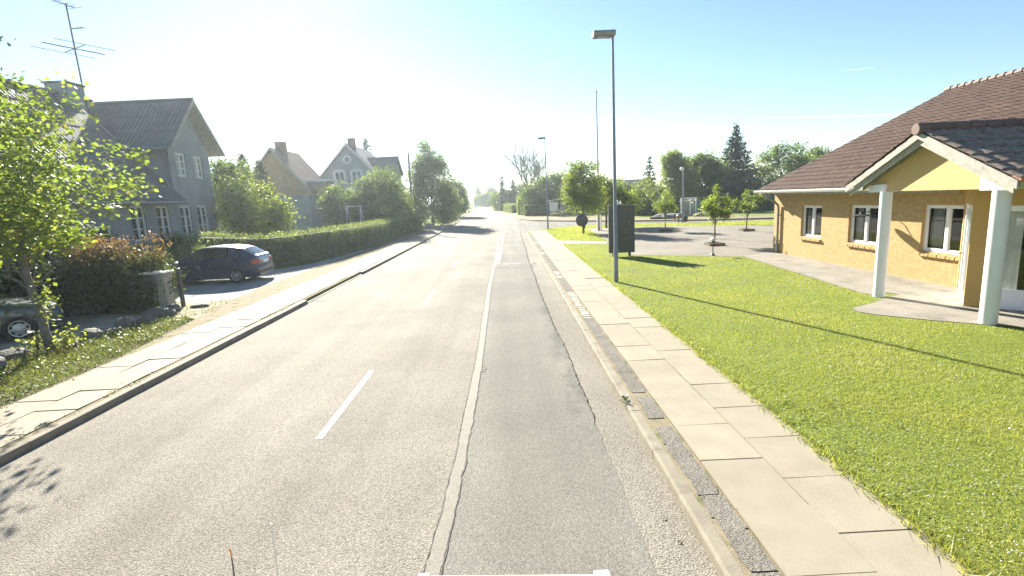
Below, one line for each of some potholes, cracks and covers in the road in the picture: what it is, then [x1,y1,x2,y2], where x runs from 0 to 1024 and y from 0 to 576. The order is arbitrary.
crack [520,233,603,441]
